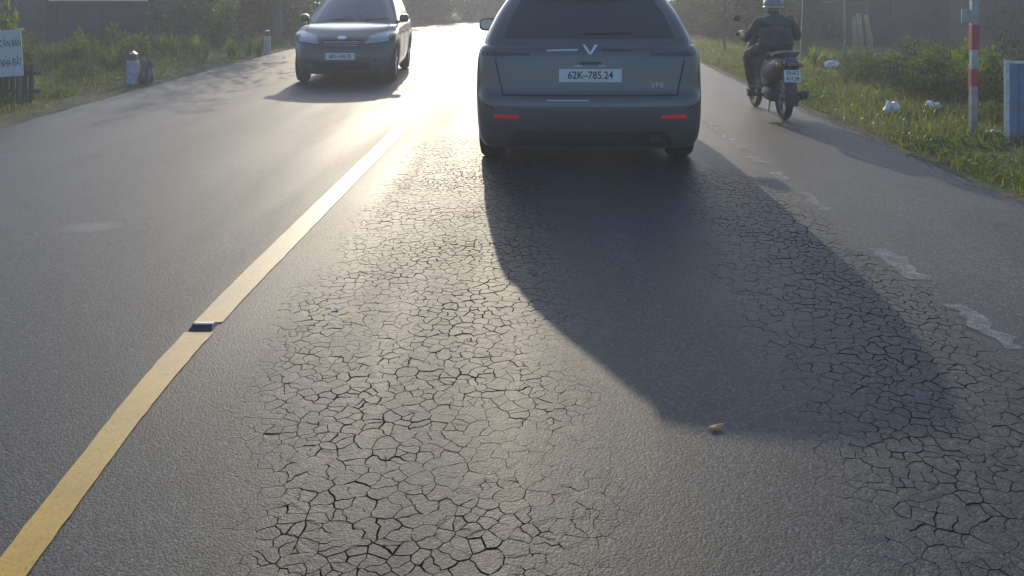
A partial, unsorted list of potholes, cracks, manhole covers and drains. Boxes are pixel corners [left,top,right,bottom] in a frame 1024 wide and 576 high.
crack [665,159,1024,576]
crack [210,134,682,576]
